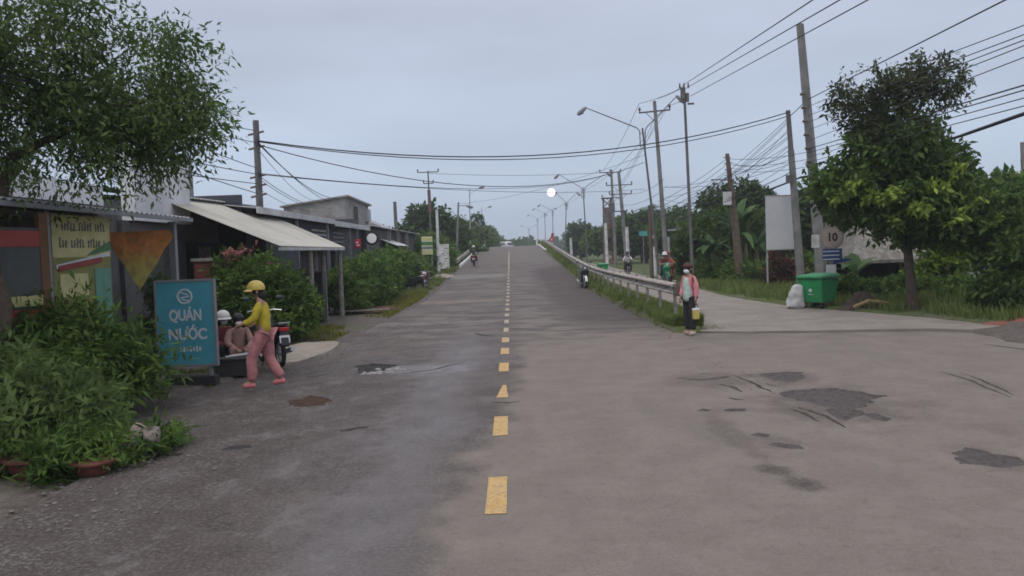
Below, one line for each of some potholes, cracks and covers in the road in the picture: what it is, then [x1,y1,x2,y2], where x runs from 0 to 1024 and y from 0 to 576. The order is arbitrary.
crack [944,372,1013,398]
crack [792,408,846,428]
crack [680,373,779,400]
pothole [354,363,406,375]
